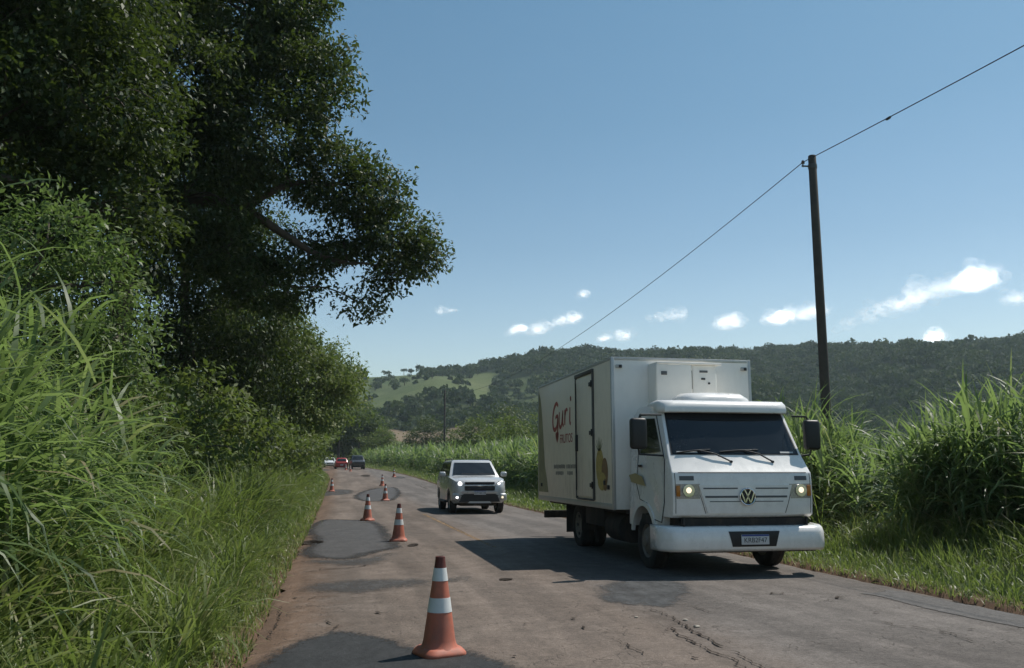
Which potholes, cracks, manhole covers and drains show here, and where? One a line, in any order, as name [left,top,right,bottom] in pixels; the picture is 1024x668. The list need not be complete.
crack [647,604,812,668]
